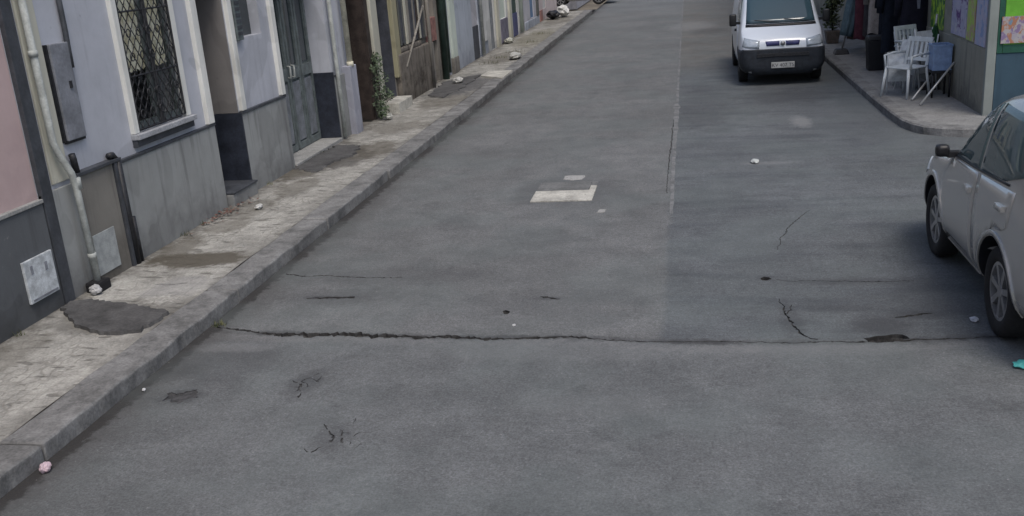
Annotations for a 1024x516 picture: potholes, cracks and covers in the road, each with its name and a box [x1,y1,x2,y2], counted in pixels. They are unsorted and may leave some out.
crack [217,299,992,344]
crack [304,418,364,453]
pothole [864,334,910,343]
crack [293,374,322,398]
pothole [162,389,198,404]
